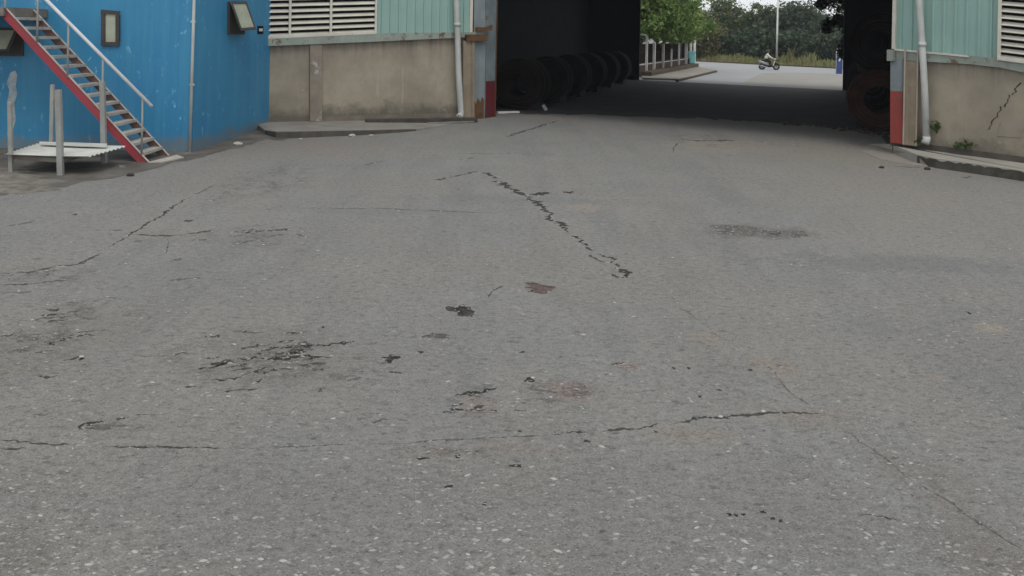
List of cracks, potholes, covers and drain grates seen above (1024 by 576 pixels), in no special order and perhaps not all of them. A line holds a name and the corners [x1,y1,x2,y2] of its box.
crack [317,158,634,278]
crack [0,185,221,379]
crack [602,423,658,432]
crack [175,330,354,393]
pothole [445,304,475,317]
crack [508,120,559,137]
